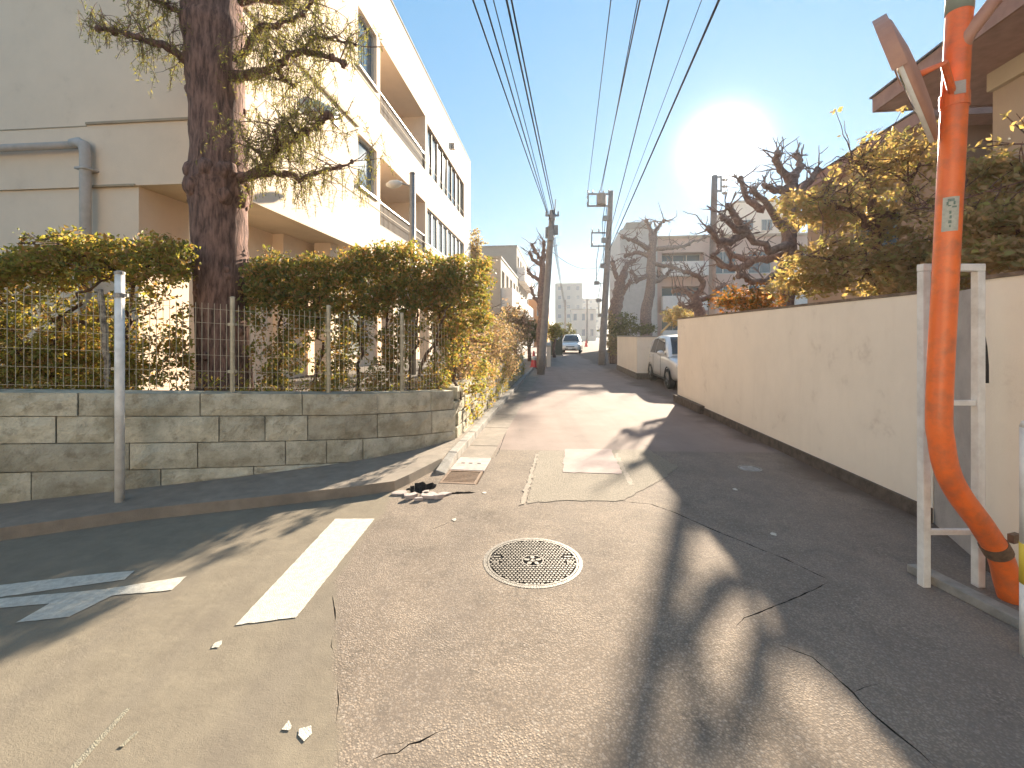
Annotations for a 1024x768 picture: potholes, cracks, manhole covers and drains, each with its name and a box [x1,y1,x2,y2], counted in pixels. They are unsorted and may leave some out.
crack [622,501,829,624]
drain grate [439,470,483,493]
crack [781,645,933,765]
crack [377,731,440,758]
manhole cover [483,538,583,589]
